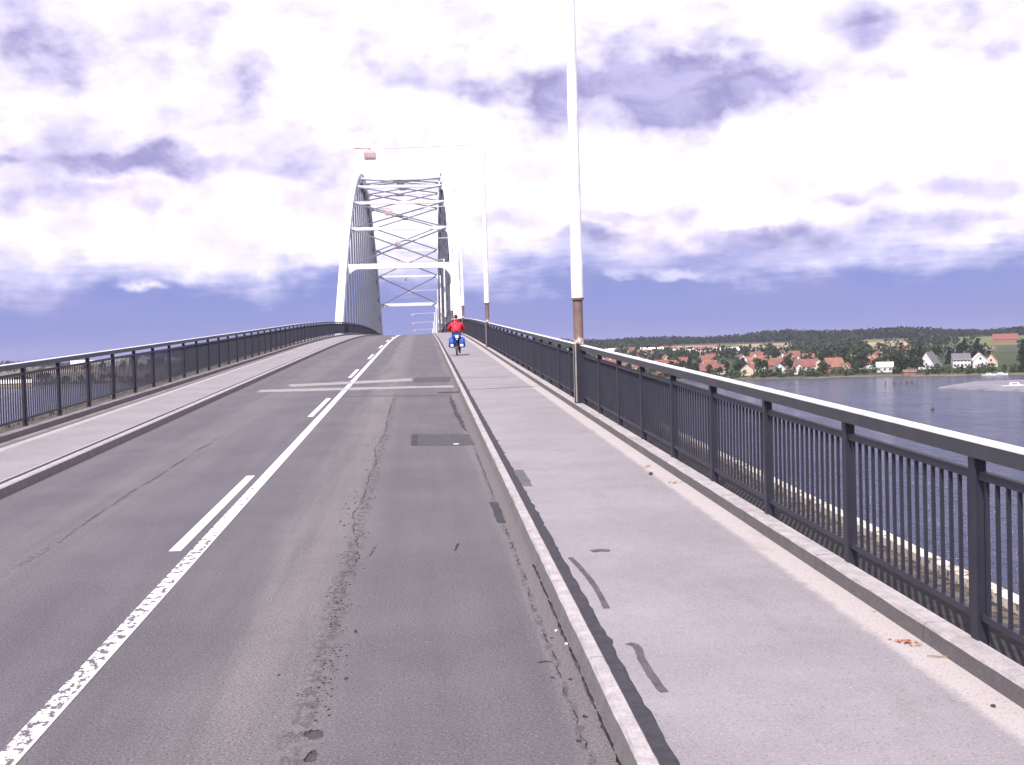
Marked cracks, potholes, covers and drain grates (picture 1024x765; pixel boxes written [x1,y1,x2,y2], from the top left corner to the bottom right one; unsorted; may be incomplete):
crack [29,444,210,562]
crack [277,399,394,722]
pothole [303,729,323,739]
pothole [303,750,318,763]
